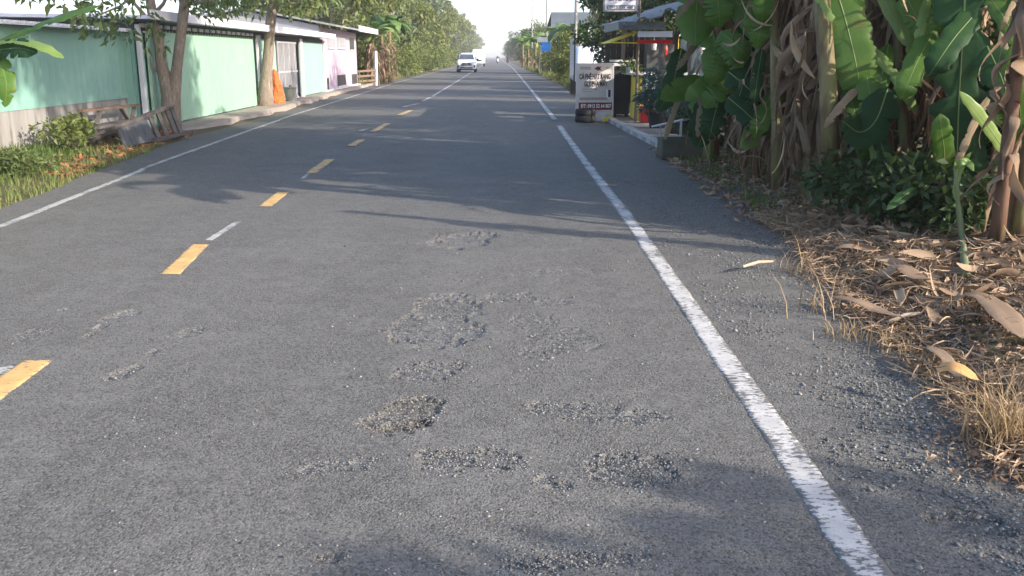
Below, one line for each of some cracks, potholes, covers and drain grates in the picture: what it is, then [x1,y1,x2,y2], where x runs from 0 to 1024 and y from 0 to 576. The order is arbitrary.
pothole [514,397,676,430]
pothole [570,445,701,495]
pothole [473,292,575,306]
pothole [165,327,209,338]
pothole [397,442,548,481]
pothole [82,307,147,339]
pothole [378,291,489,351]
pothole [504,312,605,362]
pothole [348,393,459,440]
pothole [425,231,497,250]
pothole [383,359,468,386]
